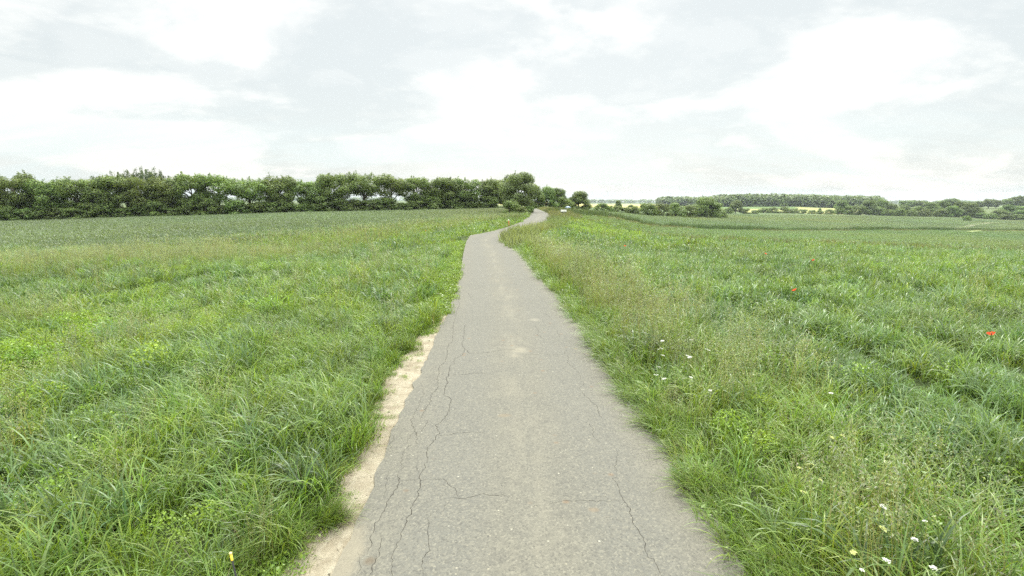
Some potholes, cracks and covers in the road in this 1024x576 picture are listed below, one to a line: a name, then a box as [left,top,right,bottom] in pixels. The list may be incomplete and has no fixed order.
crack [458,451,660,572]
crack [359,292,550,575]
